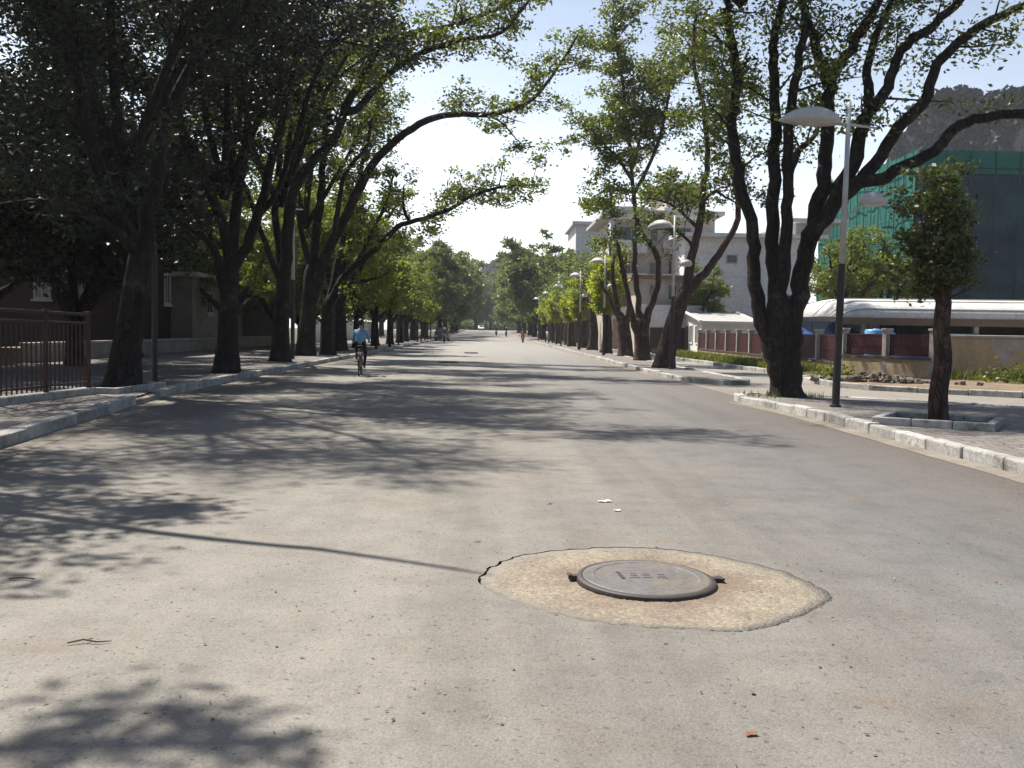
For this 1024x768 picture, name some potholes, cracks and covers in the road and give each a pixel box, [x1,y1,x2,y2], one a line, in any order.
manhole cover [567,560,725,602]
